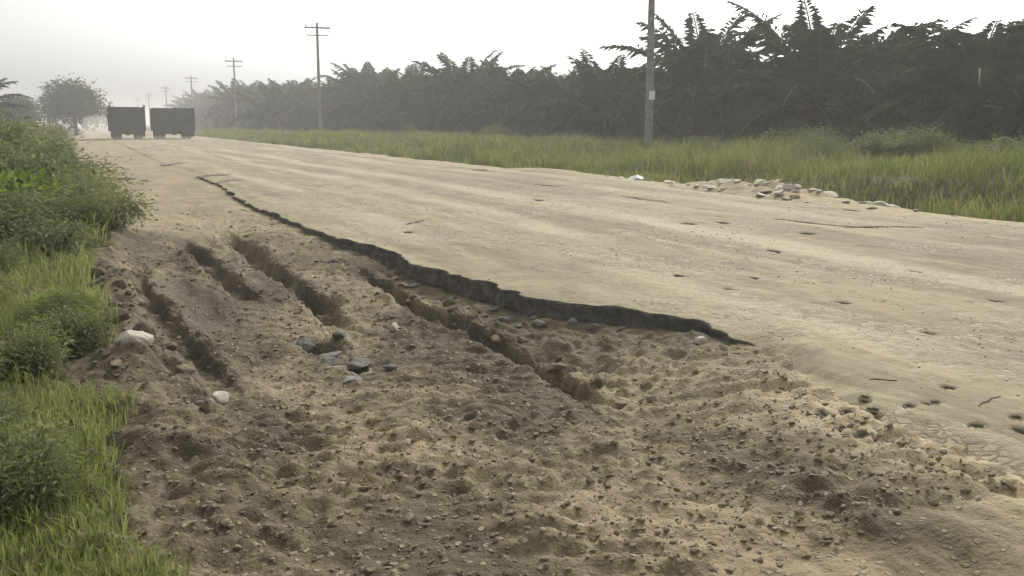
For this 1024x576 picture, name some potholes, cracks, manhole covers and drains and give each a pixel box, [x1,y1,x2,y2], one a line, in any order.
pothole [369,258,798,404]
